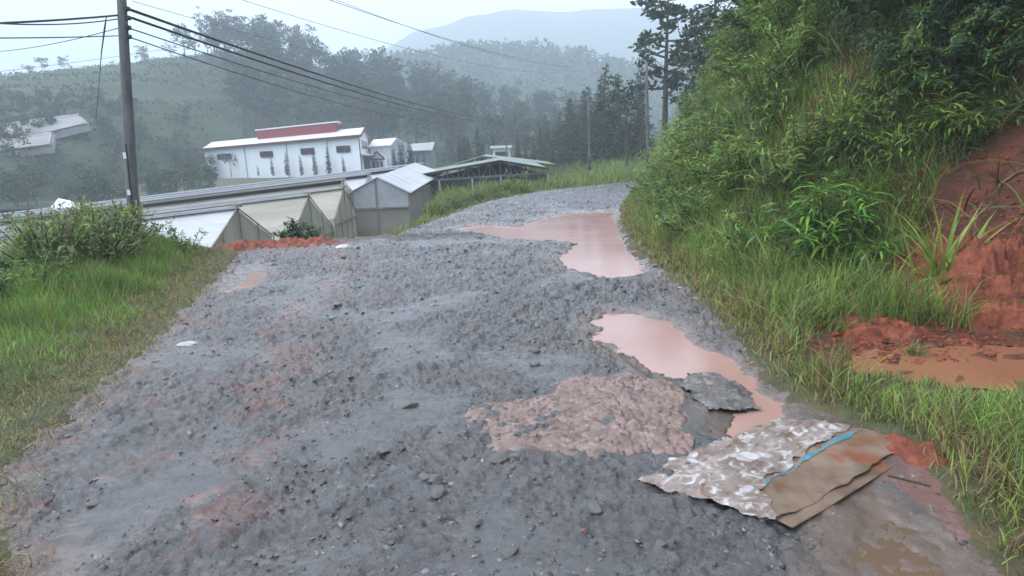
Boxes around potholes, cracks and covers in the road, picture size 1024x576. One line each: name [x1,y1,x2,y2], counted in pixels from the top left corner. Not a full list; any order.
pothole [444,209,653,278]
pothole [581,307,815,440]
